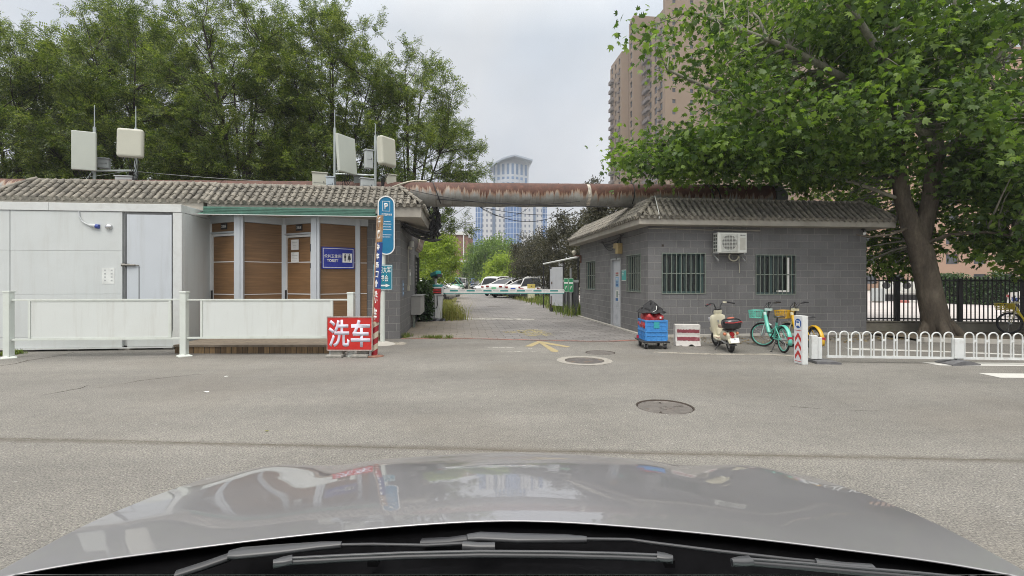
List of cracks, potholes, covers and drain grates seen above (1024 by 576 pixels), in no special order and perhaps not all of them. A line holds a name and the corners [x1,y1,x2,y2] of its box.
manhole cover [557,356,613,365]
manhole cover [636,399,695,414]
